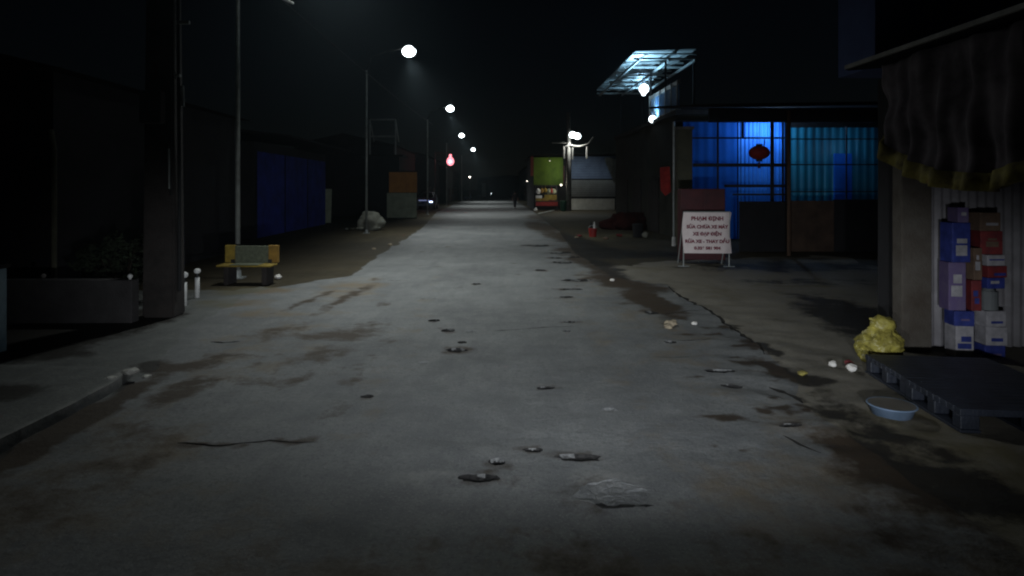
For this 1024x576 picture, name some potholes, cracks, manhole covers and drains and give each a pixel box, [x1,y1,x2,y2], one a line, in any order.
pothole [554,454,601,462]
pothole [458,474,500,483]
crack [652,285,765,358]
